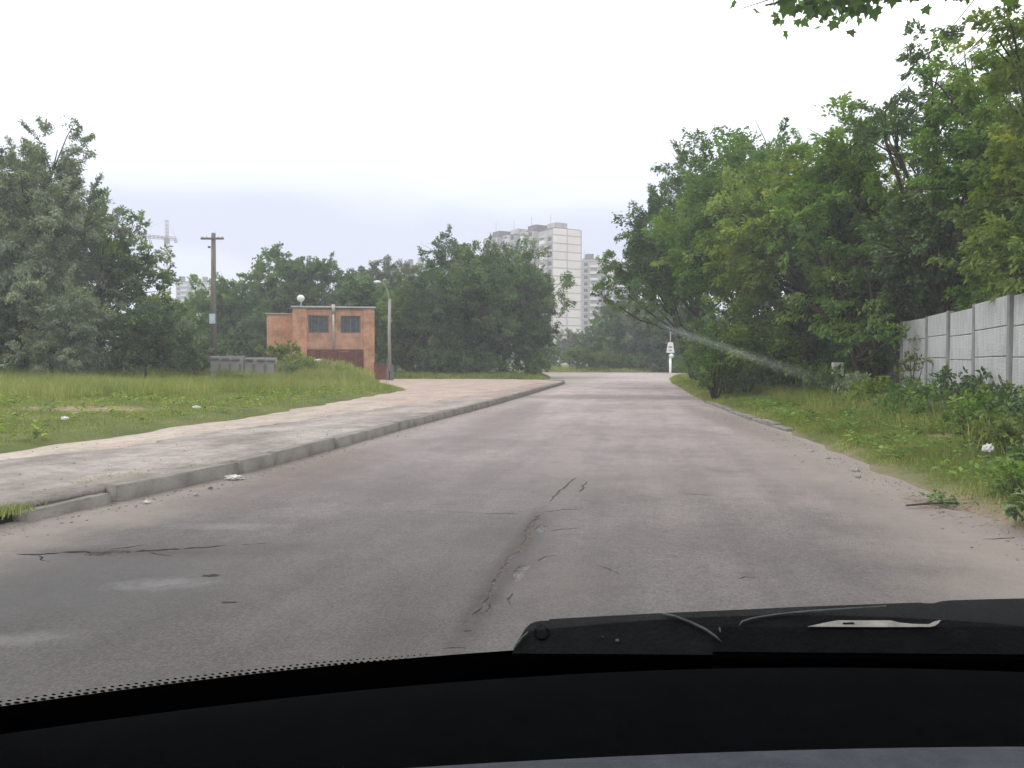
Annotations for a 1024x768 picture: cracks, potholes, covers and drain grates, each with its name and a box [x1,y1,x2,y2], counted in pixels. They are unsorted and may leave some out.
crack [18,543,264,562]
crack [440,478,587,618]
